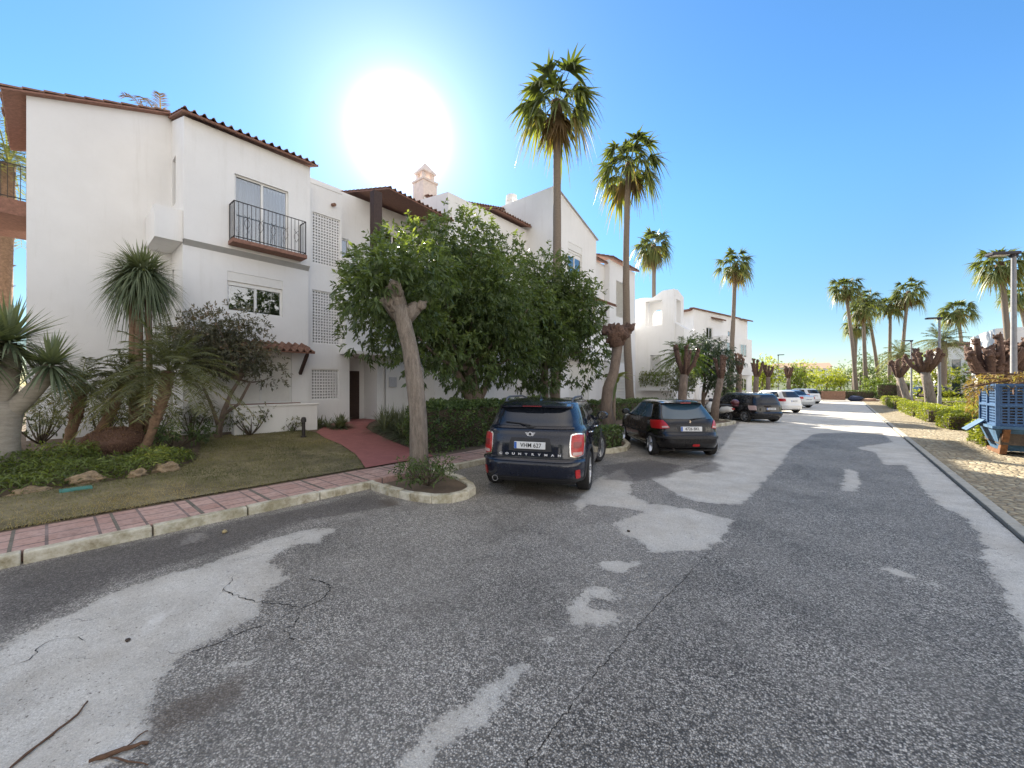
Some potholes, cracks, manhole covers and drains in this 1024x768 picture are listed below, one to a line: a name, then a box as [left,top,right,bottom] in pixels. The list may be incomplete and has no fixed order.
crack [164,576,331,657]
